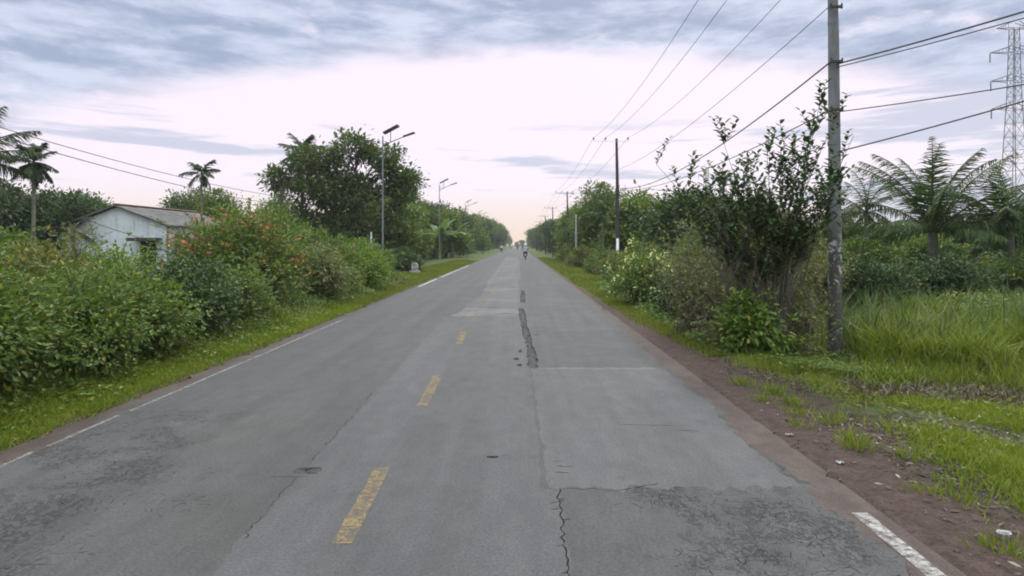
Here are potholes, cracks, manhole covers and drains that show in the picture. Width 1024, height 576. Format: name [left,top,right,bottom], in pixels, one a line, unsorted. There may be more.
pothole [519,308,538,368]
crack [548,461,916,576]
